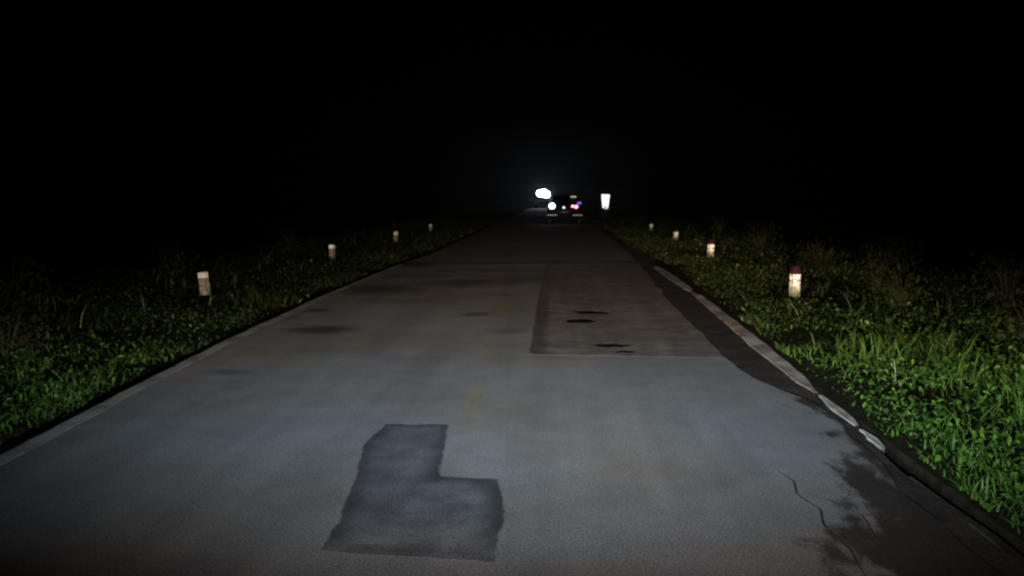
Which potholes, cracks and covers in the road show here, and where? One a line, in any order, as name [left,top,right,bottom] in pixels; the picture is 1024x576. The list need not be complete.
crack [774,468,915,576]
